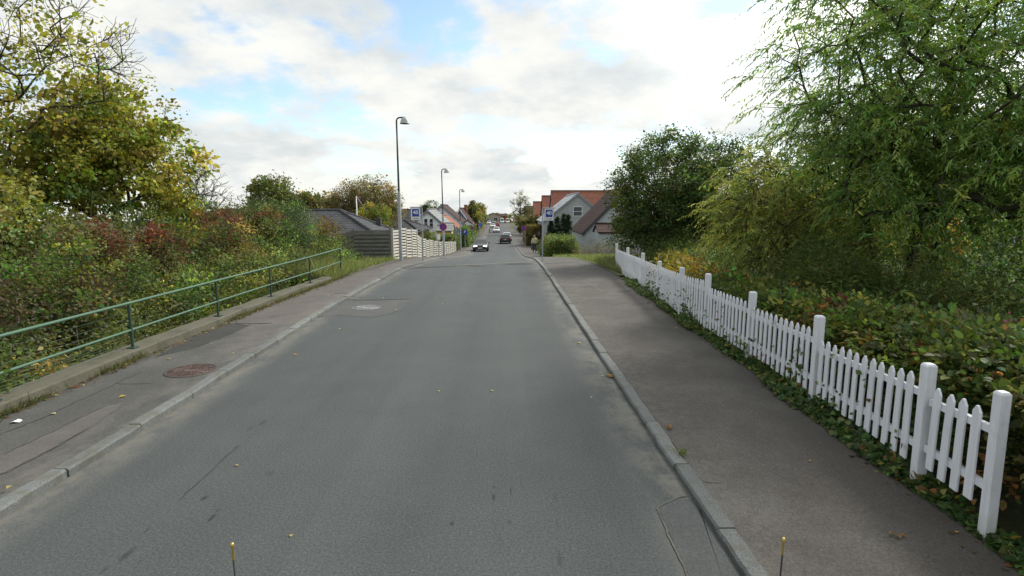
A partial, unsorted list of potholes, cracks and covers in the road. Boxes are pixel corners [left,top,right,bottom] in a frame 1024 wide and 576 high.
manhole cover [163,363,218,378]
crack [656,480,721,576]
